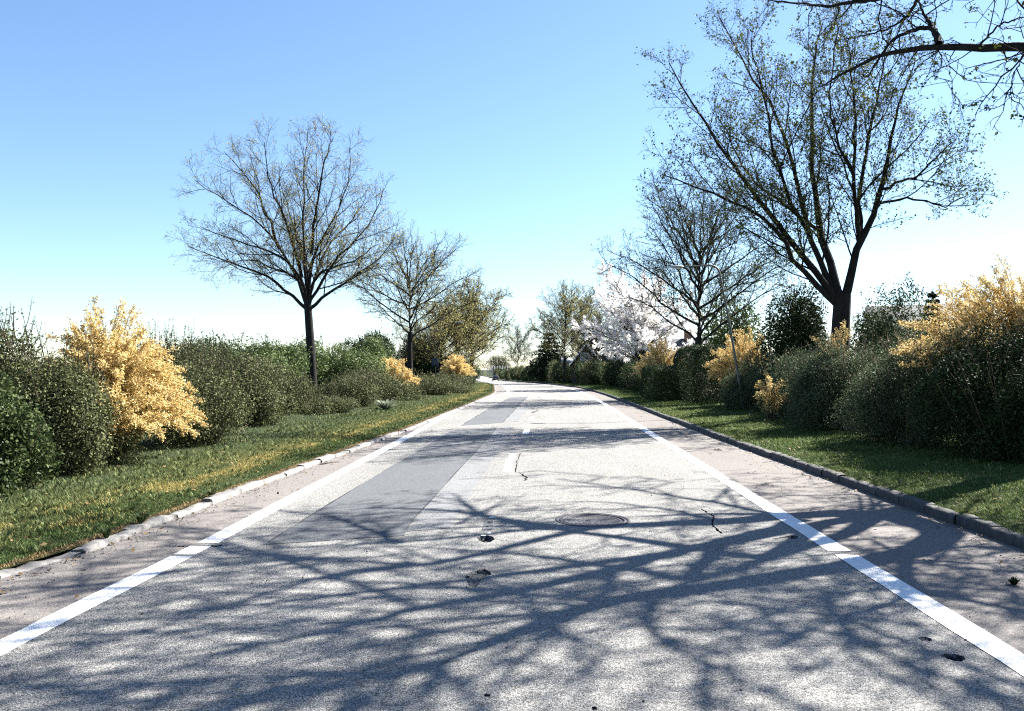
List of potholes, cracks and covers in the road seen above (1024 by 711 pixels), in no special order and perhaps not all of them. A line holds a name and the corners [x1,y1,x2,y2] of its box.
pothole [939,653,965,662]
manhole cover [555,513,631,527]
pothole [466,570,487,588]
crack [701,509,722,534]
